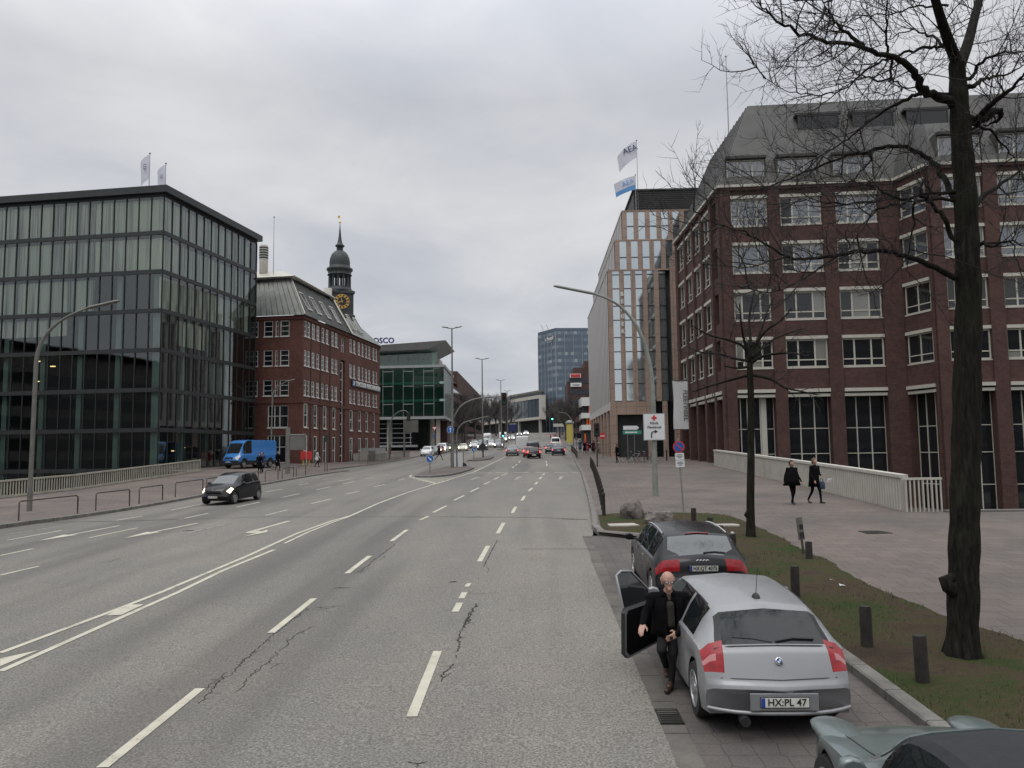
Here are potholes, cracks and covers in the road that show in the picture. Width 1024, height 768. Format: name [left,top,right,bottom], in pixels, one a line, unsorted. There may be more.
crack [198,605,342,704]
drain grate [654,708,685,725]
crack [440,592,487,681]
